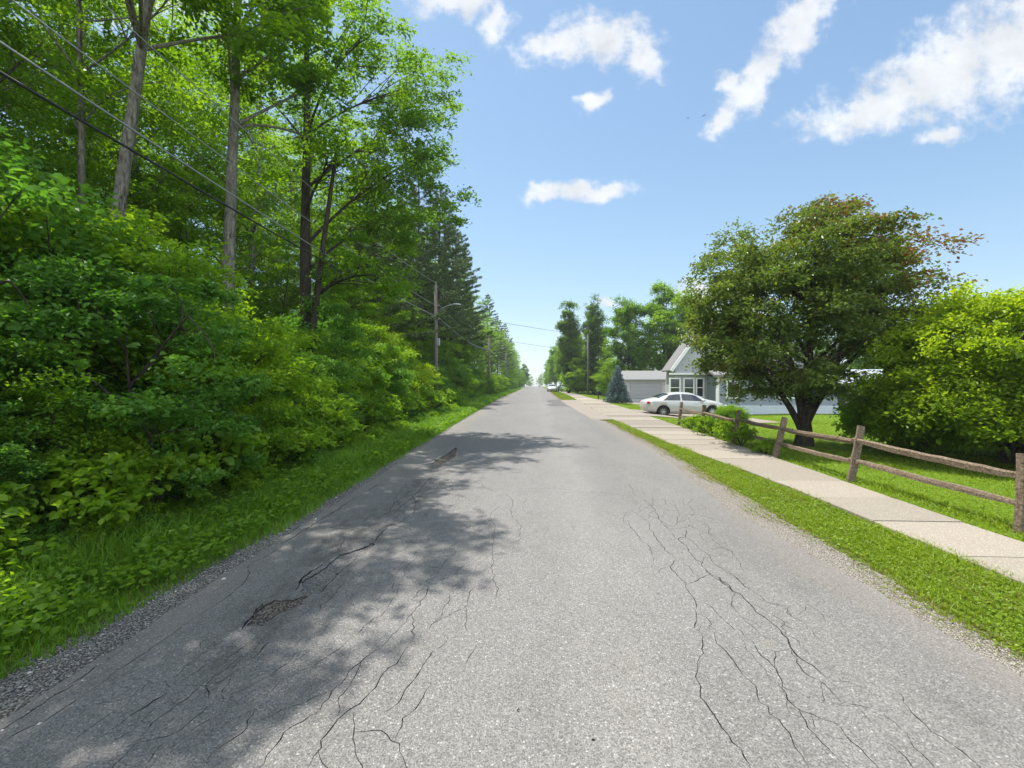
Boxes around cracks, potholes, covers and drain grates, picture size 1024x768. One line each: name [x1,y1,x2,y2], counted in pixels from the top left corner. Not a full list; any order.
pothole [431,448,457,465]
crack [623,505,934,767]
crack [77,478,471,768]
crack [899,692,980,767]
pothole [248,597,306,626]
